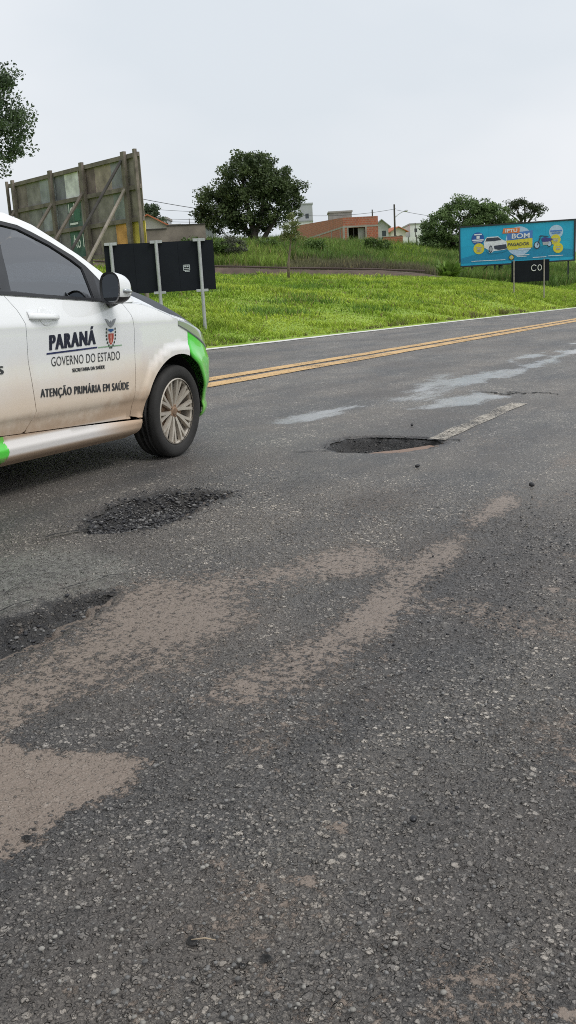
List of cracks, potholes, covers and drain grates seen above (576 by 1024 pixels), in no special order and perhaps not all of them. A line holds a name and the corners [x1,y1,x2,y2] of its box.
pothole [0,585,119,661]
pothole [65,487,246,536]
pothole [324,435,444,454]
